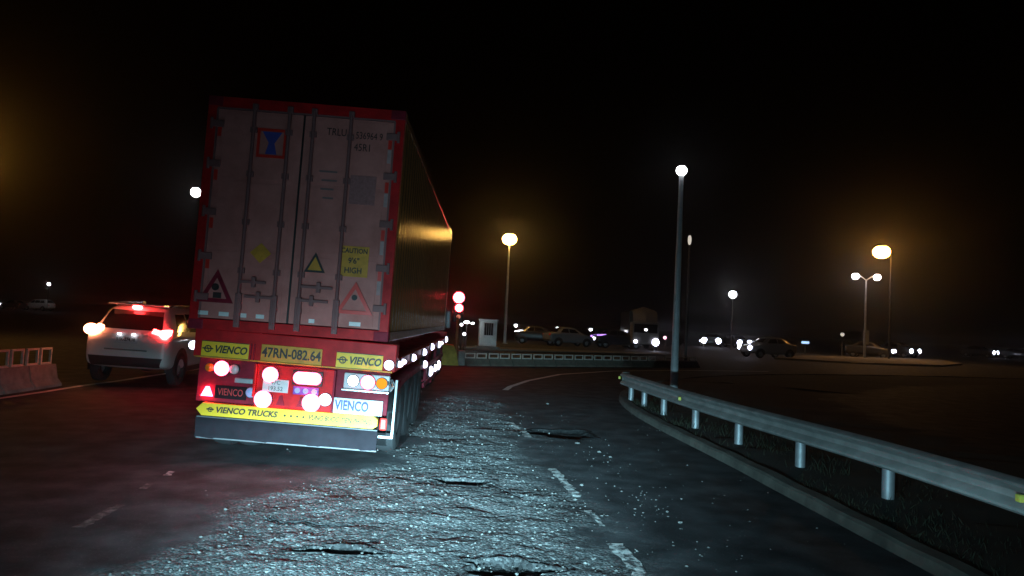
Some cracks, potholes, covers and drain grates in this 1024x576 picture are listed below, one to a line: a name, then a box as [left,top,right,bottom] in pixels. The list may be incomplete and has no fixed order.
pothole [426,477,499,487]
pothole [514,428,599,441]
pothole [279,543,396,558]
pothole [457,556,575,576]
